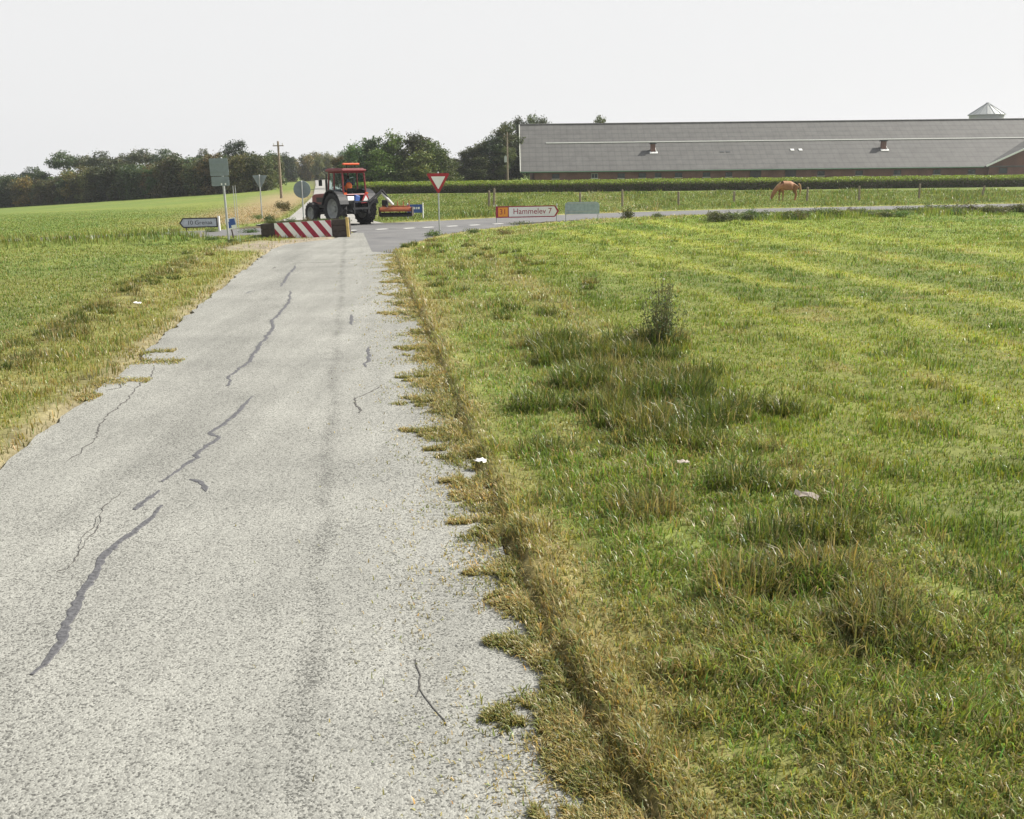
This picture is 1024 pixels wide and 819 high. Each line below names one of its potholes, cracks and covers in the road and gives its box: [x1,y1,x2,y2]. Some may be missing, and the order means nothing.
crack [415,659,447,726]
crack [362,347,372,367]
crack [58,491,122,571]
crack [67,367,155,461]
